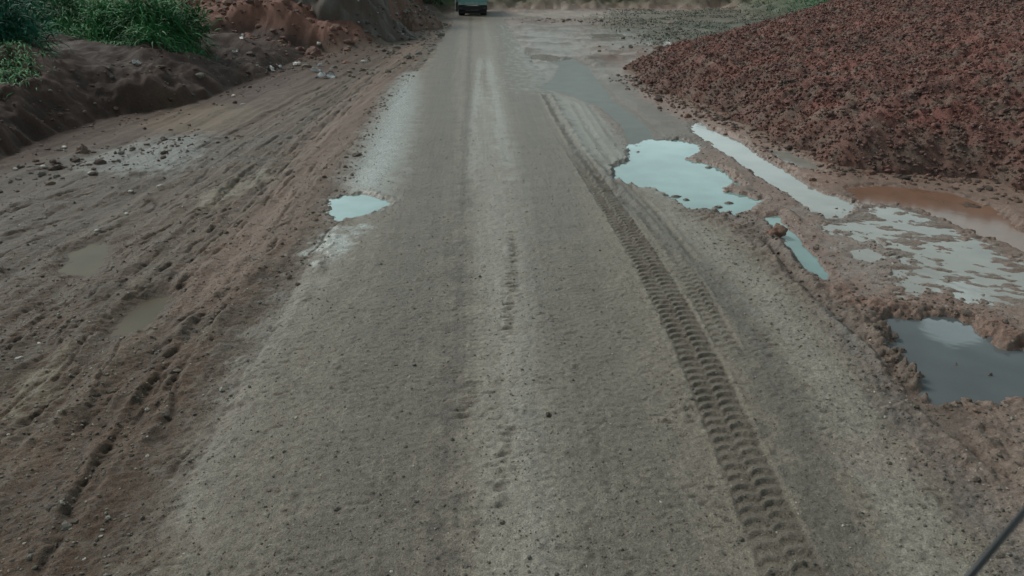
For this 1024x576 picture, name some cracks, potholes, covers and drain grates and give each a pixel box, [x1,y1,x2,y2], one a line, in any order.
pothole [320,190,399,222]
pothole [870,302,1024,411]
pothole [606,136,775,219]
